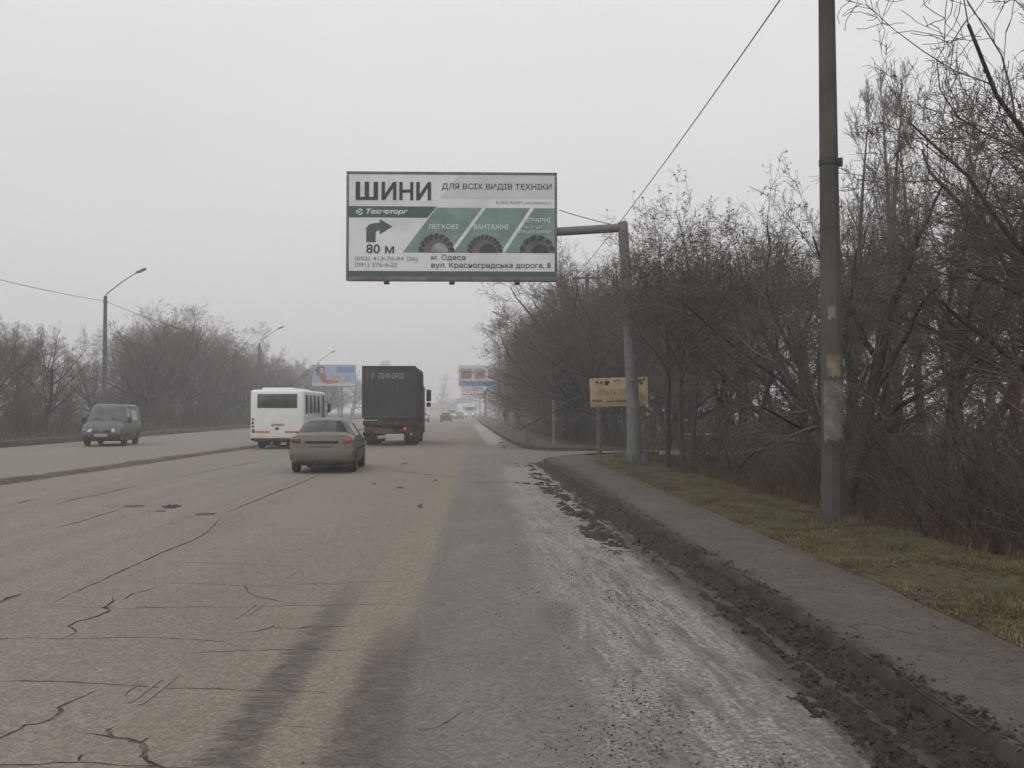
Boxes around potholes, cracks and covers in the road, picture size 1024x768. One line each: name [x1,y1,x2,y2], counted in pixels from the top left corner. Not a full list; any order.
crack [56,486,135,528]
crack [414,710,468,730]
crack [1,581,415,654]
crack [0,680,357,768]
